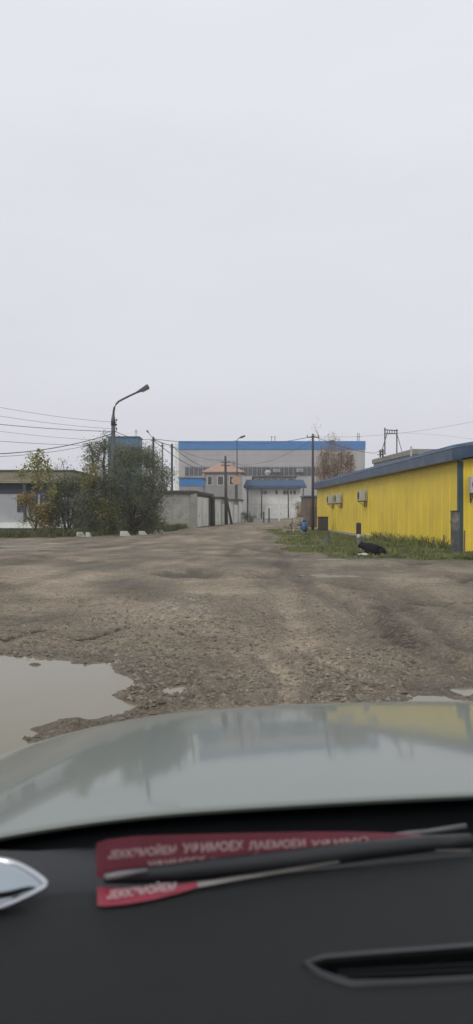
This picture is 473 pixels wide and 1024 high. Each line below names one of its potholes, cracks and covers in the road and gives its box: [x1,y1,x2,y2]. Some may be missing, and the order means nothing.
pothole [143,569,236,580]
